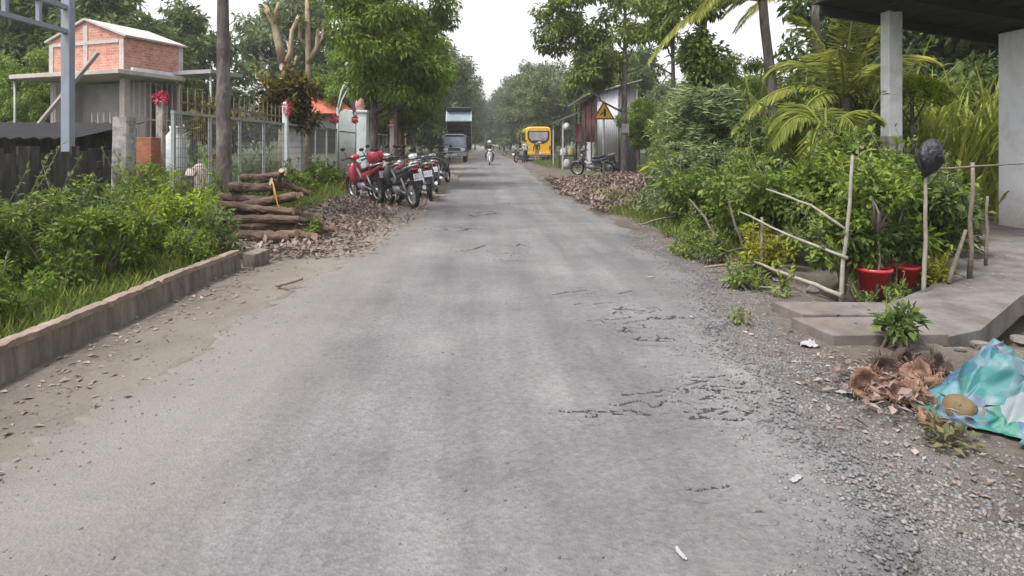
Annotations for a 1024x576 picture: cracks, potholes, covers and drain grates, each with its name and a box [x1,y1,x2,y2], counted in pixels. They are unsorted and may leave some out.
crack [674,475,779,527]
crack [551,368,782,429]
crack [546,288,695,347]
crack [426,203,536,263]
